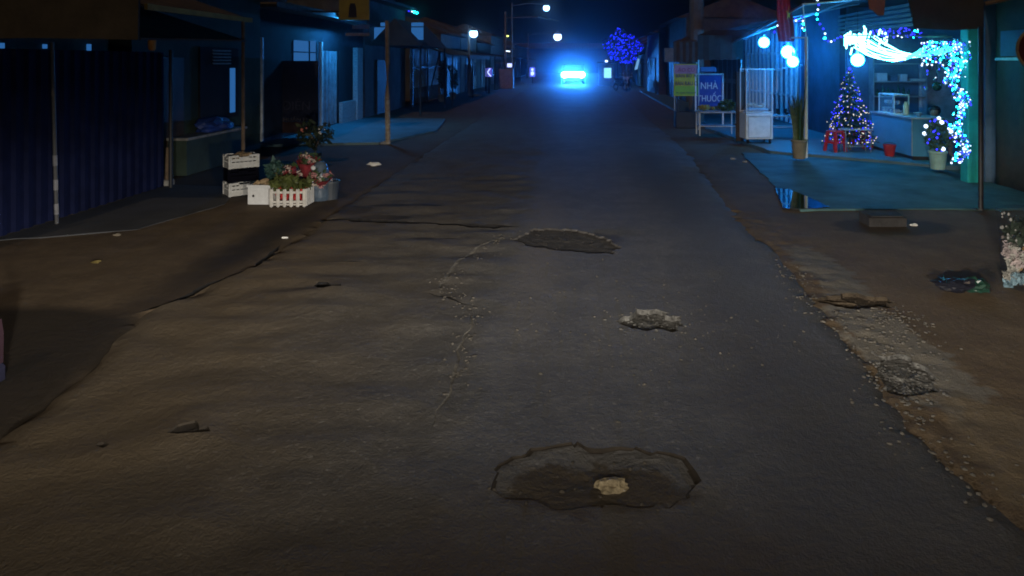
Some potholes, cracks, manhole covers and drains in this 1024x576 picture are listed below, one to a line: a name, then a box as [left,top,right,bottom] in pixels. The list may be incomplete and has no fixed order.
crack [314,218,514,239]
pothole [488,441,701,511]
pothole [512,227,621,255]
pothole [868,347,951,406]
pothole [809,293,896,310]
pothole [603,307,692,335]
